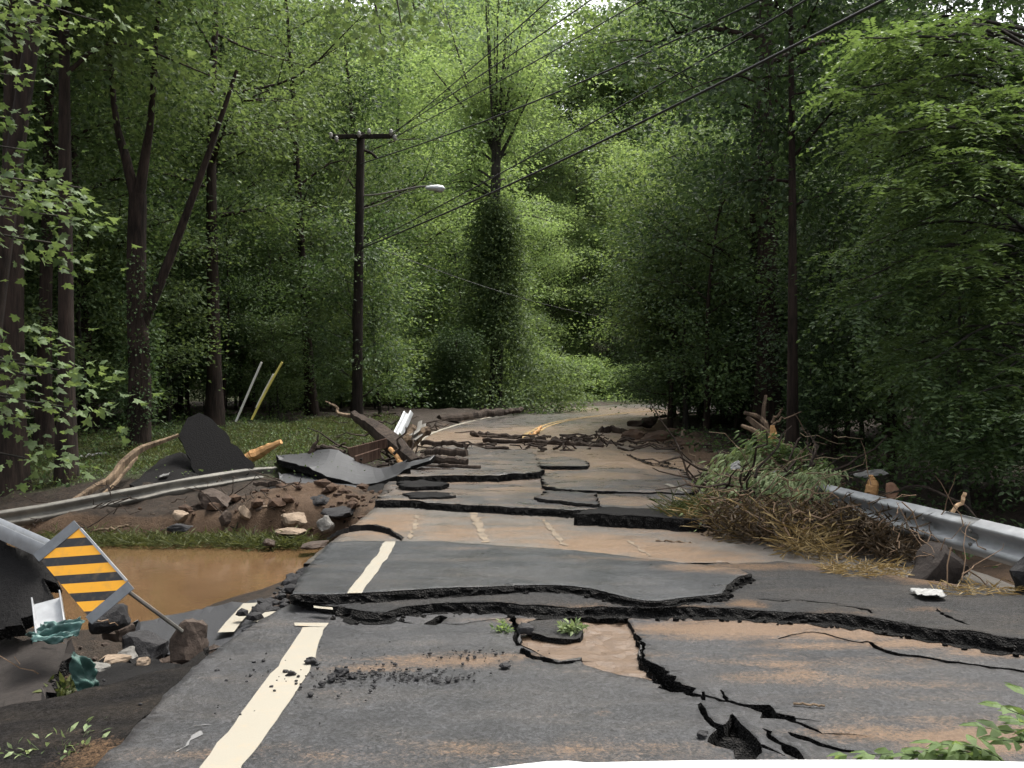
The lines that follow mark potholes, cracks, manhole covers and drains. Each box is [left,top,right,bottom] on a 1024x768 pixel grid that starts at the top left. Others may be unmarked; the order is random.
pothole [698,705,770,760]
crack [379,466,709,533]
pothole [520,618,661,684]
crack [294,573,1024,753]
